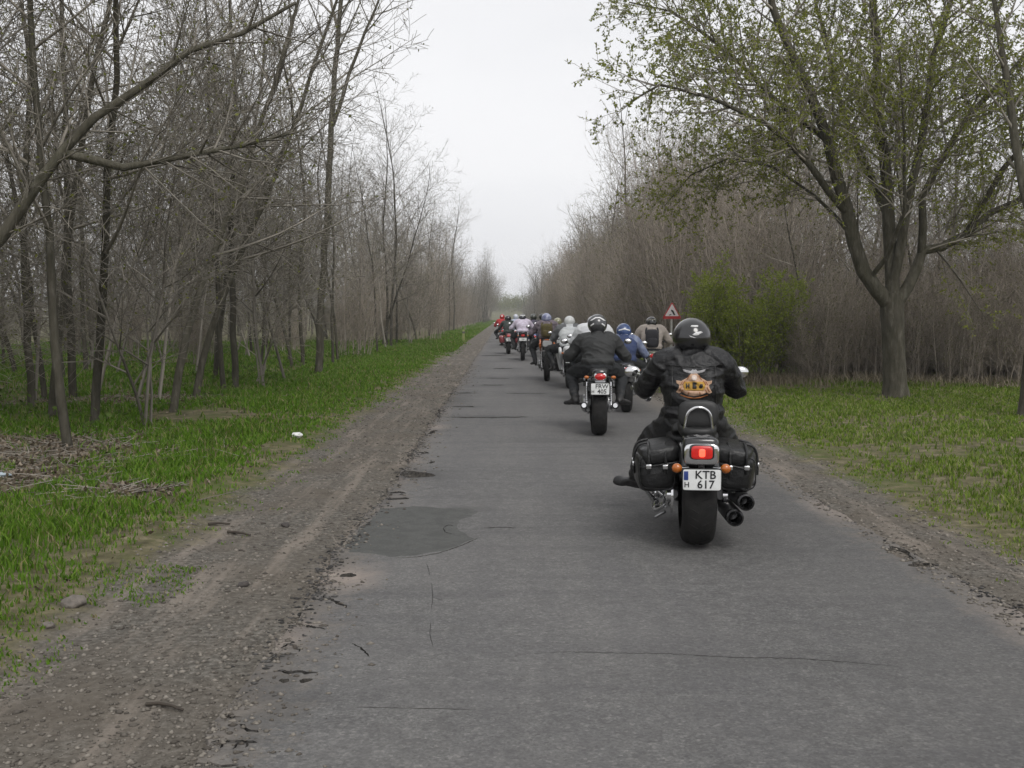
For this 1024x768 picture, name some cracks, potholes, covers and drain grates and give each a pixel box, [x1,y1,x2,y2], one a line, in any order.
crack [534,651,891,666]
crack [272,622,324,674]
crack [389,525,511,645]
